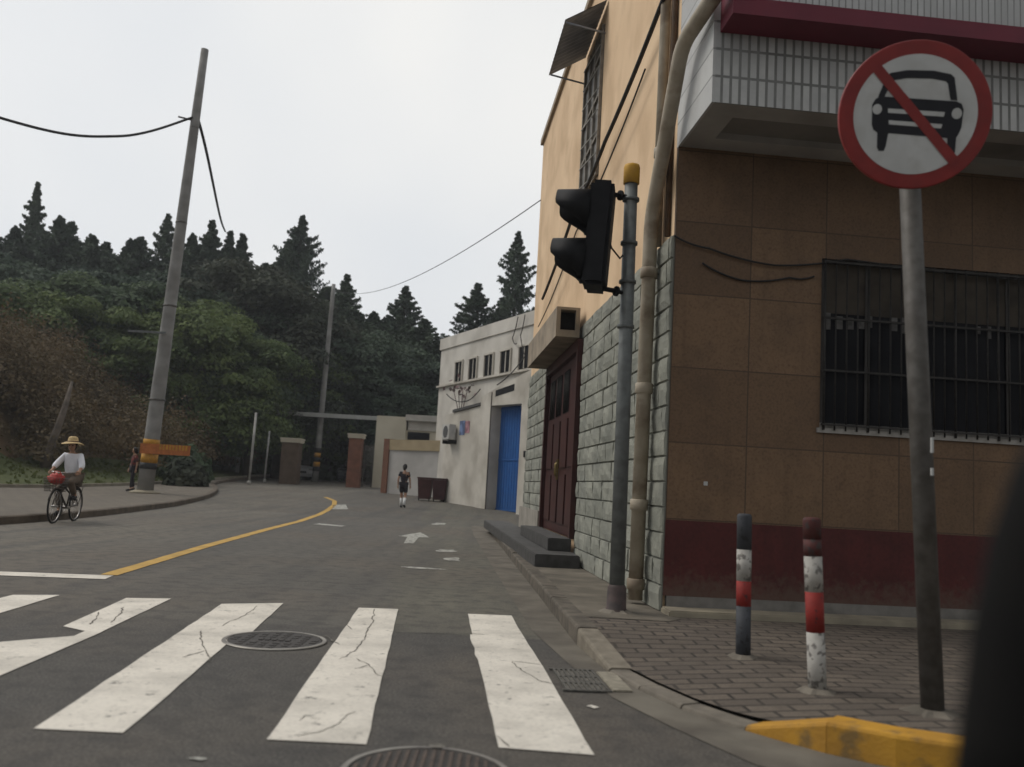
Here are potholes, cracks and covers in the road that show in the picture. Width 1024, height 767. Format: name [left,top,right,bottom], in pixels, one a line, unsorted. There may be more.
manhole cover [221,631,327,650]
drain grate [549,668,632,693]
manhole cover [341,743,507,767]
